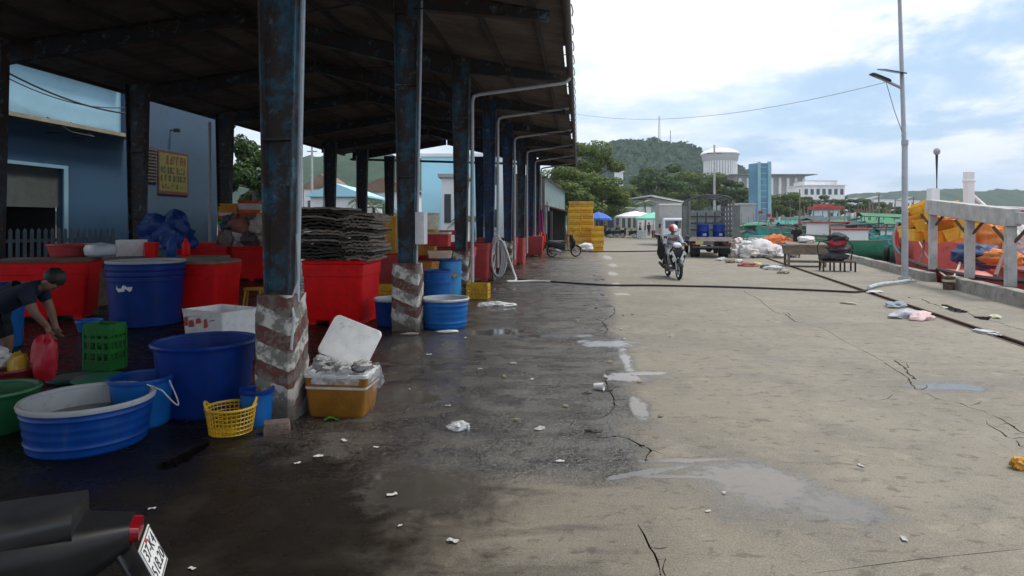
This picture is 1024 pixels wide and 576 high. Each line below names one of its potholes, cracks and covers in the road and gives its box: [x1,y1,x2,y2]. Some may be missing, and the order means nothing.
crack [882,360,1023,447]
crack [744,291,880,360]
crack [599,380,662,462]
crack [638,525,667,576]
